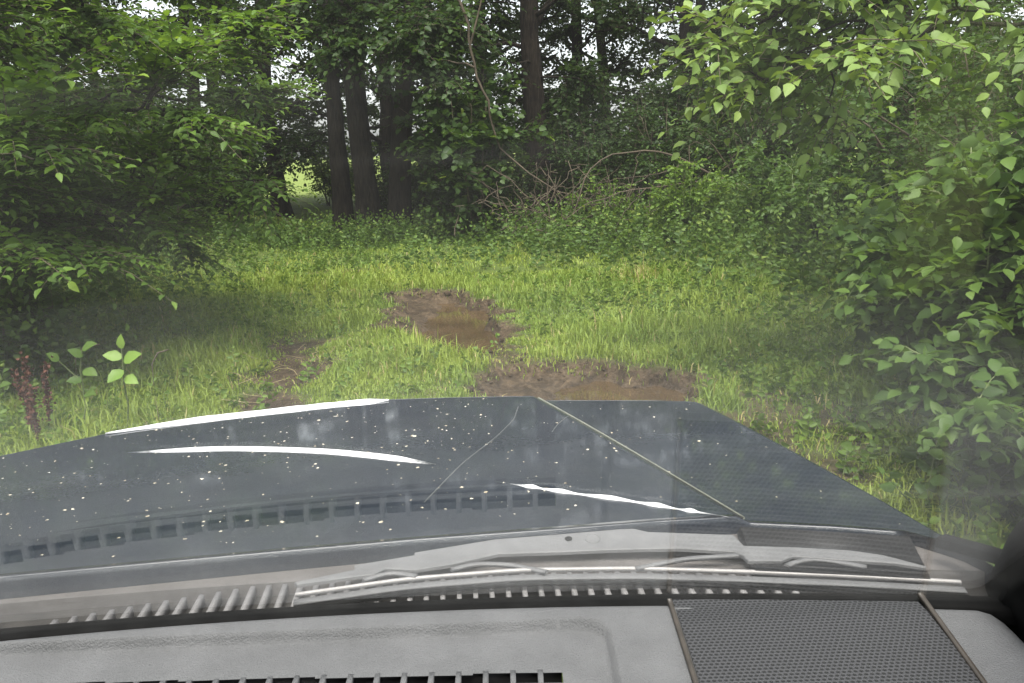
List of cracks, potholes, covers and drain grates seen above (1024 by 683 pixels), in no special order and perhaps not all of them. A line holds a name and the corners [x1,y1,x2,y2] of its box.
pothole [369,288,531,355]
